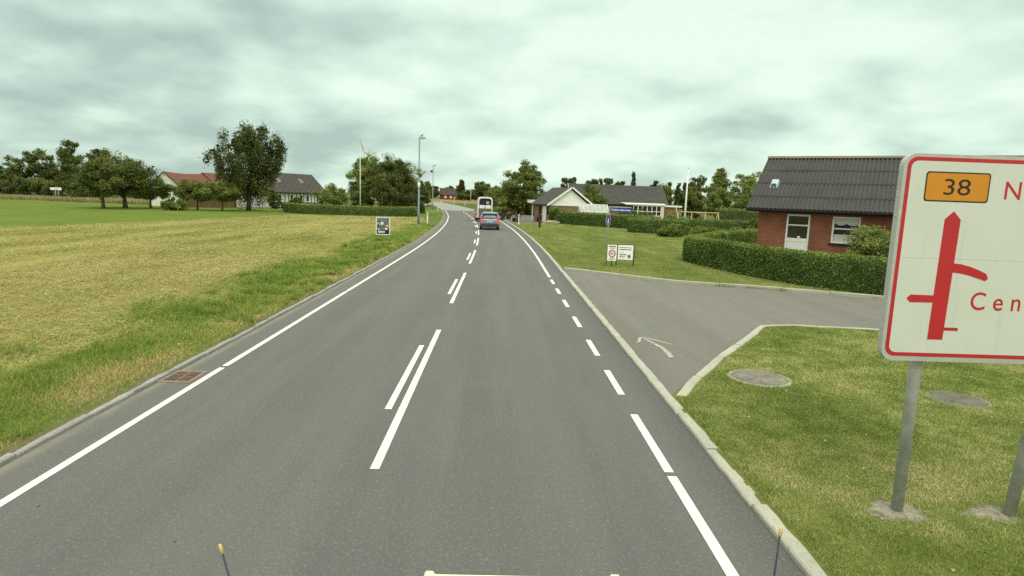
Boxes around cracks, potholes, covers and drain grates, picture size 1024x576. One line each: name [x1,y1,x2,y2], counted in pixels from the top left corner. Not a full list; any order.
drain grate [157,370,208,383]
manhole cover [924,391,993,410]
manhole cover [726,369,792,388]
